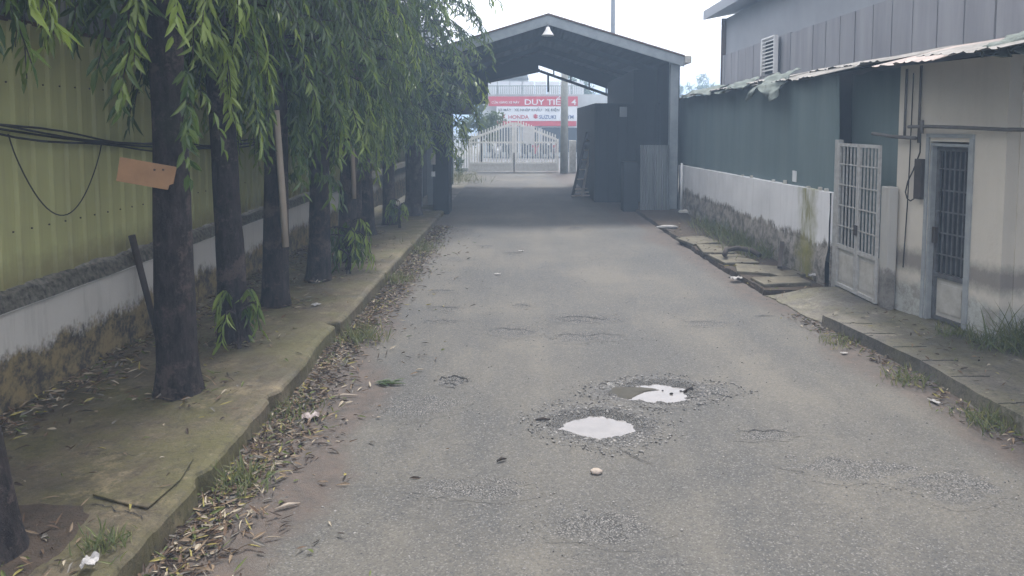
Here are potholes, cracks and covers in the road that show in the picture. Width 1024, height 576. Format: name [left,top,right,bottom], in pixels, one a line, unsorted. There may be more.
pothole [433,373,471,388]
pothole [524,401,675,454]
pothole [581,375,746,410]
